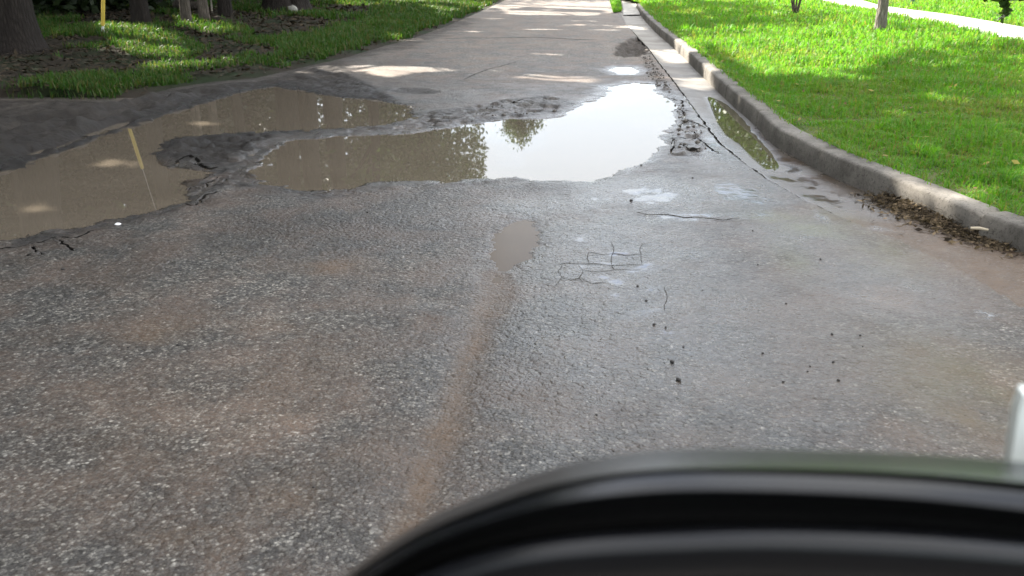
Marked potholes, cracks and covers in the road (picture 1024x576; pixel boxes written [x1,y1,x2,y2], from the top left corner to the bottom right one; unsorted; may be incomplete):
crack [0,228,103,256]
crack [557,242,643,284]
pothole [243,82,680,194]
pothole [0,85,419,241]
pothole [482,218,550,275]
crack [630,29,855,223]
